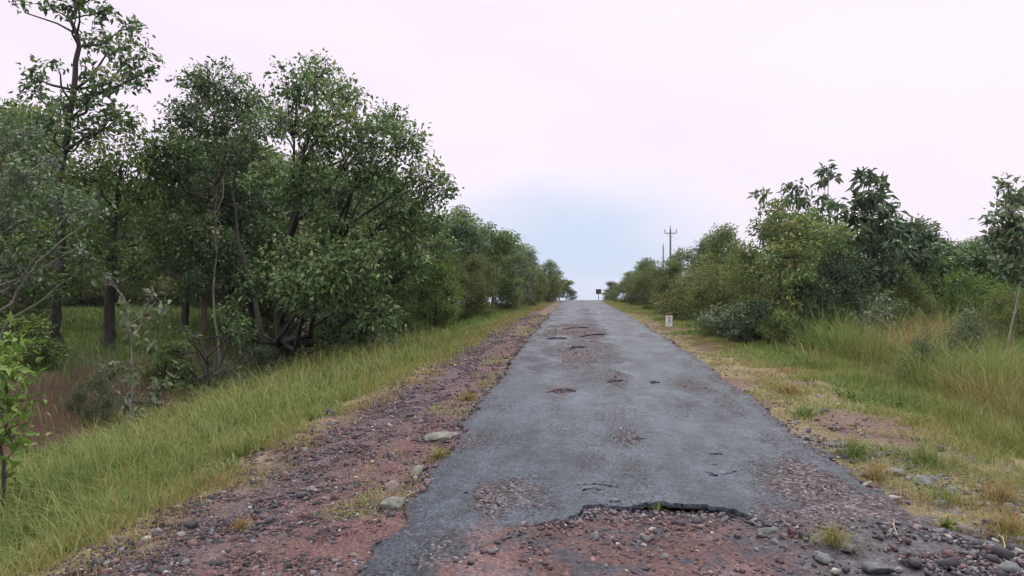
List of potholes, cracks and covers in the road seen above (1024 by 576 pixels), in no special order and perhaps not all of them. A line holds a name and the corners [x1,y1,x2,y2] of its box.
pothole [438,505,1024,576]
